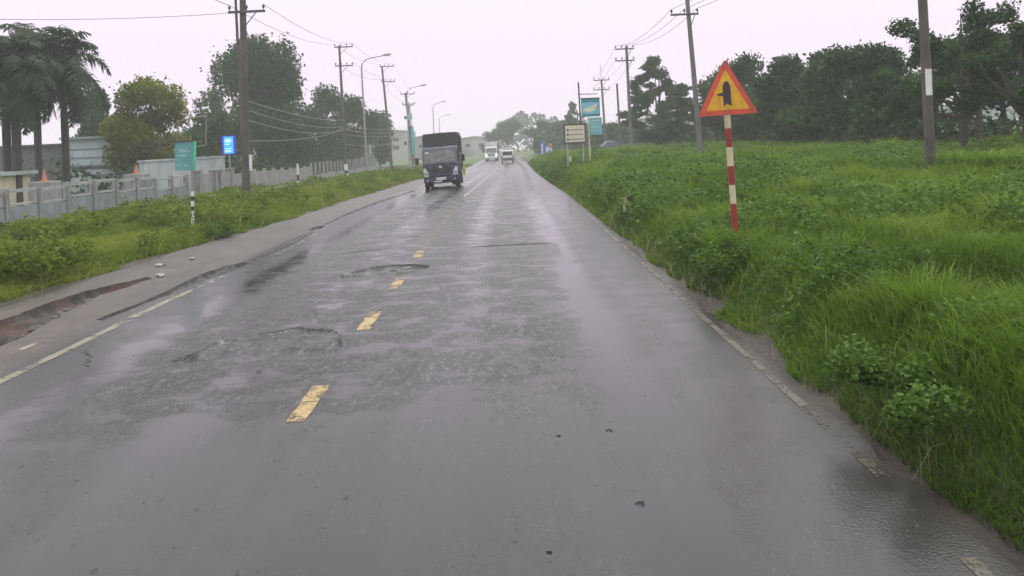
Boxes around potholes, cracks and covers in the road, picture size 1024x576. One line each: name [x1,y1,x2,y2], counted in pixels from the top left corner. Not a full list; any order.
pothole [340,264,430,278]
pothole [172,327,342,363]
crack [81,350,93,368]
pothole [0,277,152,347]
